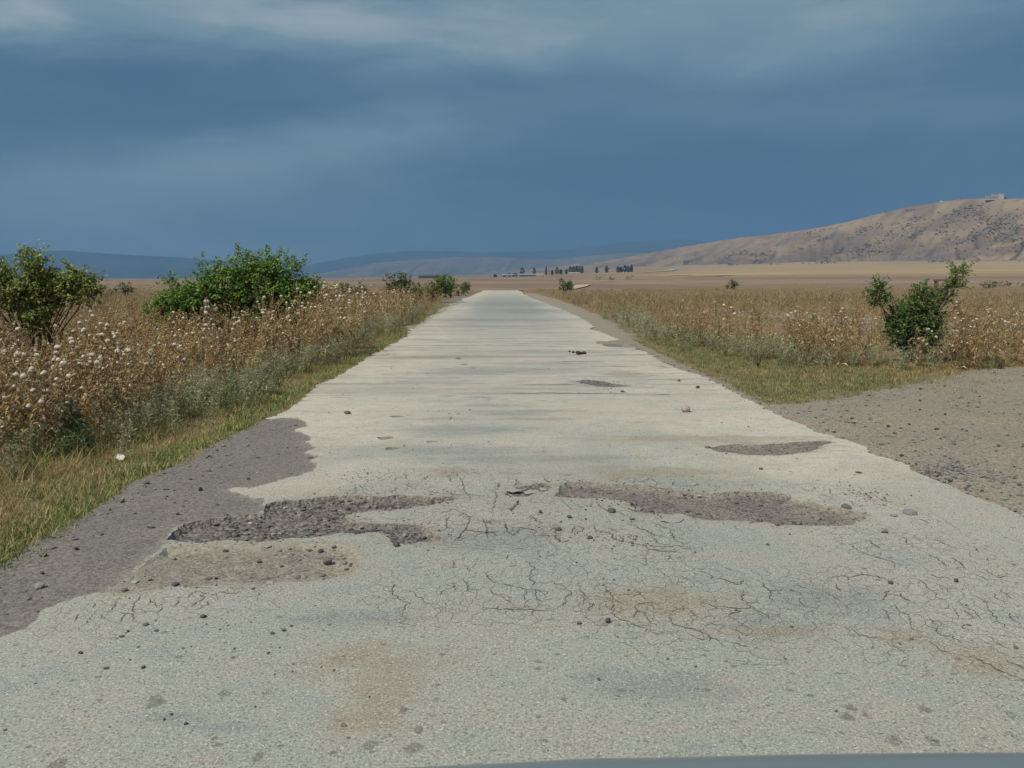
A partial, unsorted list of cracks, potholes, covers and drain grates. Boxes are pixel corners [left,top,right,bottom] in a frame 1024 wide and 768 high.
crack [779,483,1024,697]
crack [36,586,276,639]
pothole [550,480,870,529]
crack [337,468,851,666]
pothole [167,492,469,547]
pothole [711,439,836,455]
